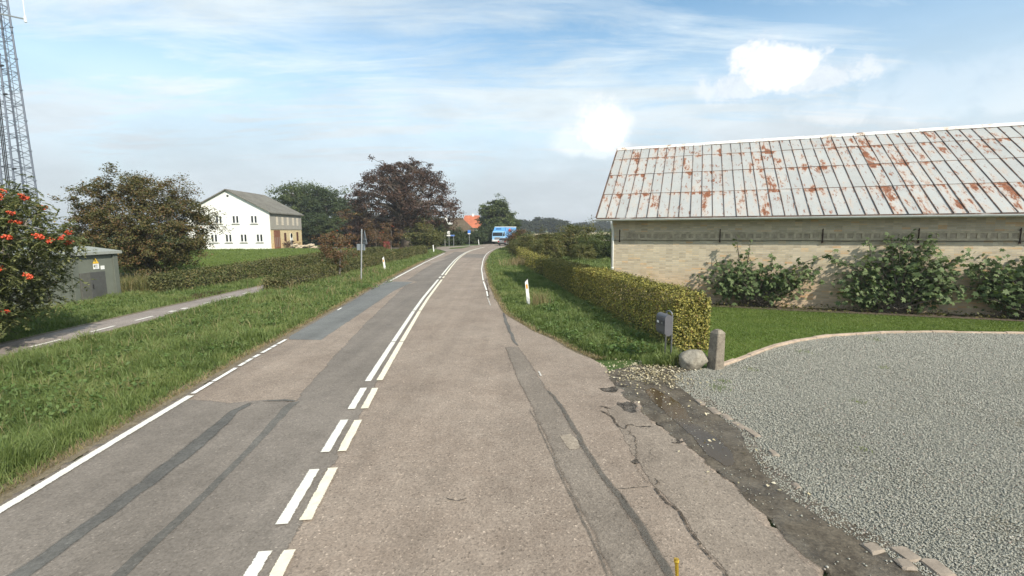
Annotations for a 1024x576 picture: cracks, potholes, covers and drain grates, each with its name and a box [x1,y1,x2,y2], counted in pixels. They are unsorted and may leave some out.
pothole [617,401,637,413]
crack [600,406,727,576]
